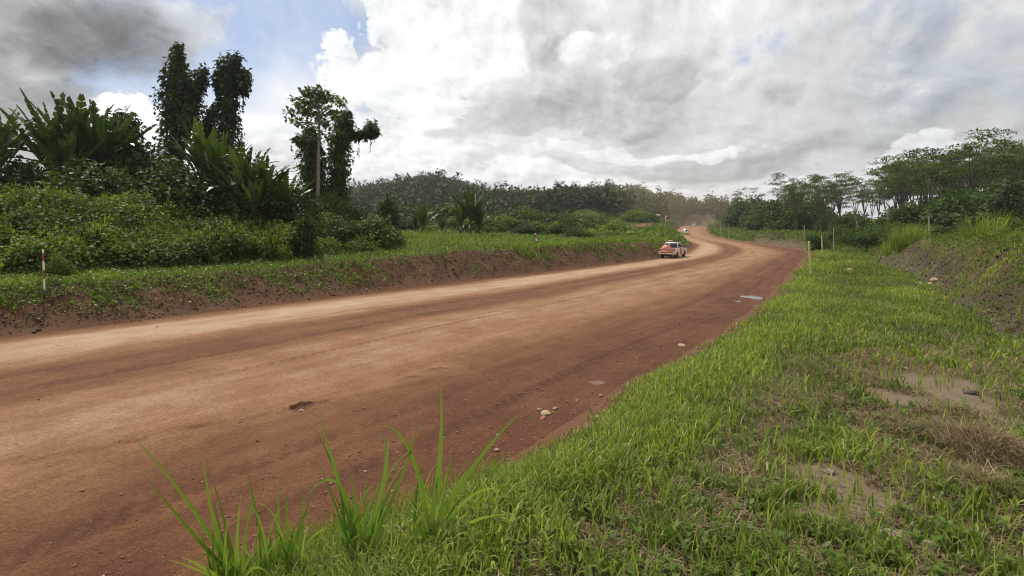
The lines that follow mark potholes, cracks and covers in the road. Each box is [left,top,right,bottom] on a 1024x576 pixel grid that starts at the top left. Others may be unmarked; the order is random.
pothole [278,397,326,417]
